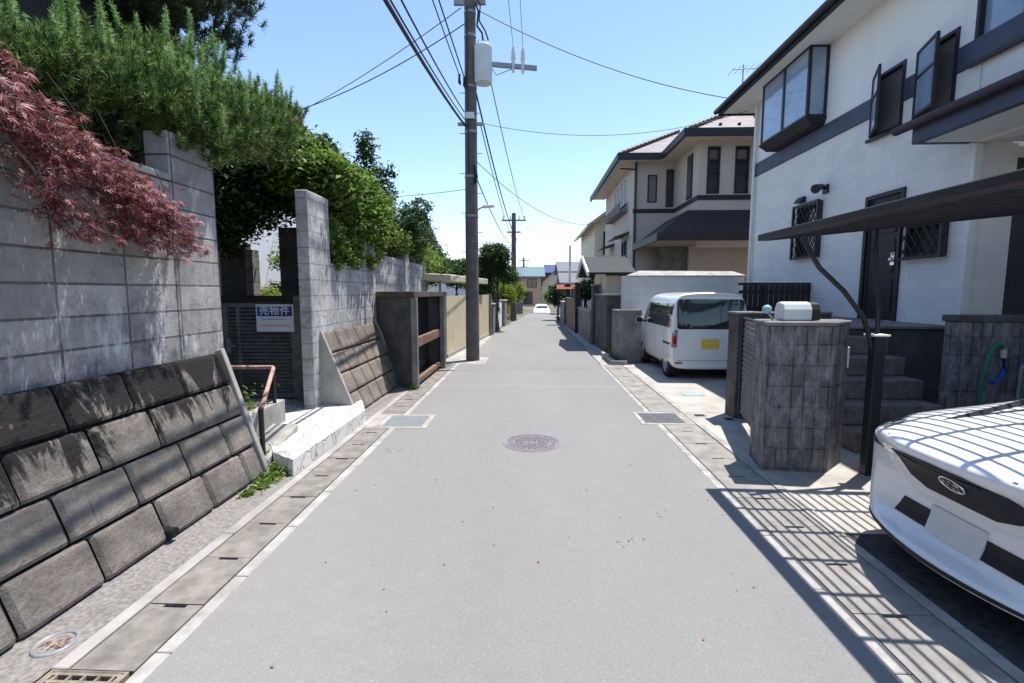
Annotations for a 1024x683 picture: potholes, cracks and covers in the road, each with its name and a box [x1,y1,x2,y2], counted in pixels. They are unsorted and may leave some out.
manhole cover [503,434,561,452]
drain grate [36,669,130,683]
drain grate [632,412,692,425]
drain grate [375,414,436,429]
